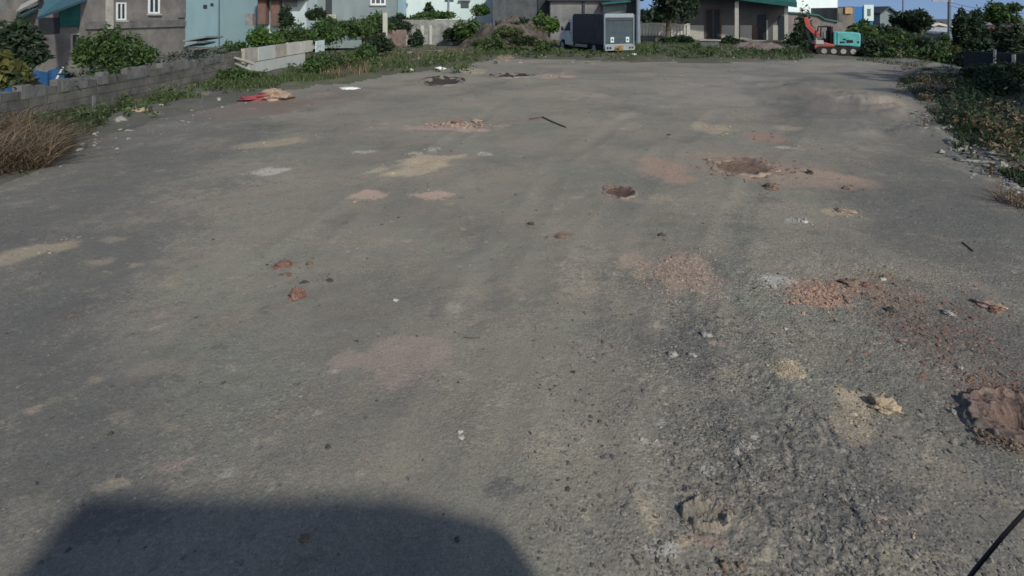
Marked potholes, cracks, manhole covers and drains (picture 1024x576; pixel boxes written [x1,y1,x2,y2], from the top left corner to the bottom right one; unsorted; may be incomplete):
pothole [678,493,733,533]
pothole [602,184,638,199]
pothole [705,157,782,178]
pothole [418,75,468,87]
pothole [956,385,1024,449]
